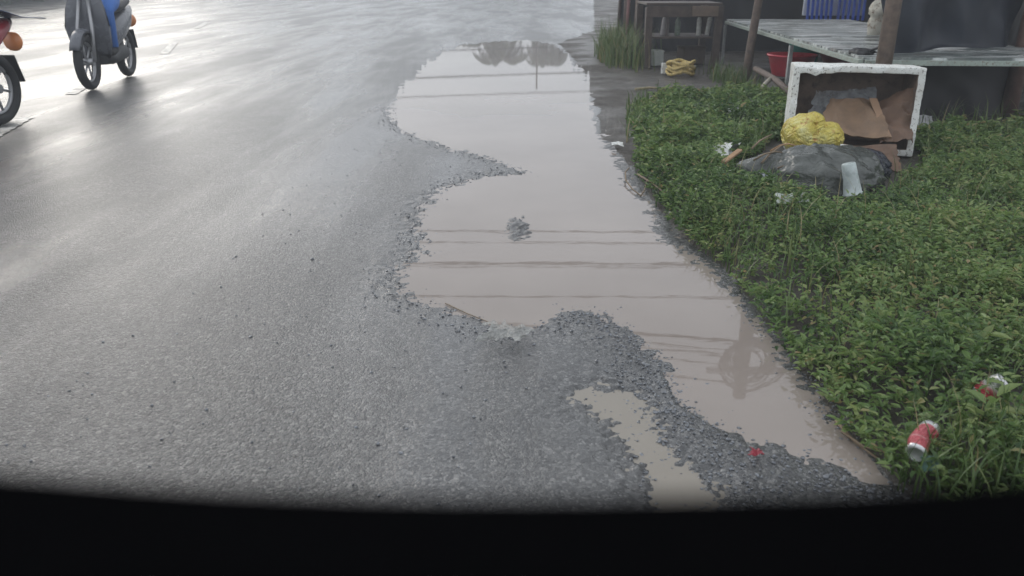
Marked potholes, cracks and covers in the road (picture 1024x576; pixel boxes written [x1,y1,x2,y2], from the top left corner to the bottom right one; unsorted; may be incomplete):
pothole [382,40,902,490]
